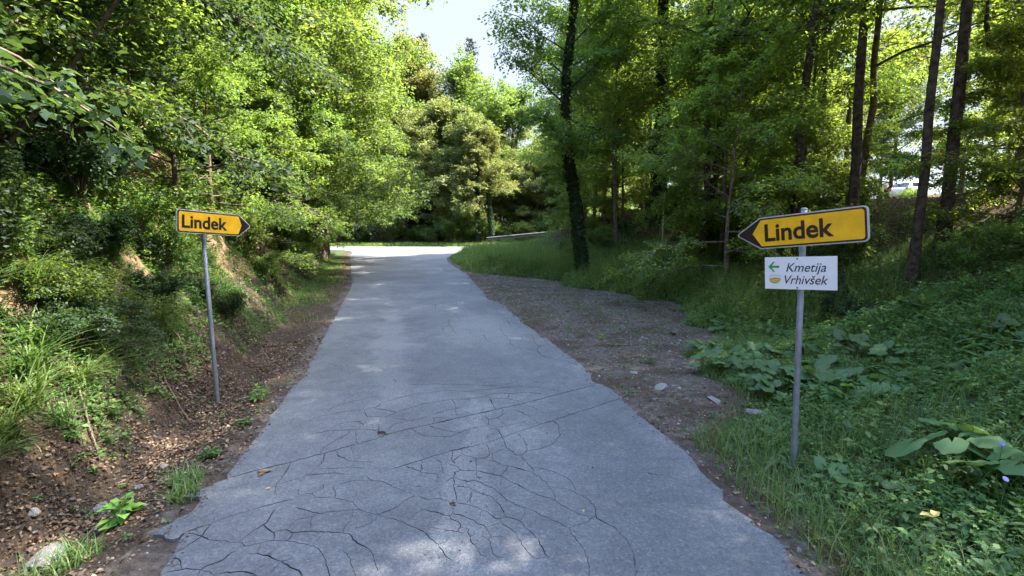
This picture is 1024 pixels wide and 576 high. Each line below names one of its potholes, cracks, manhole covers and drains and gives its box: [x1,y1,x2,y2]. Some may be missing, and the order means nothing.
crack [162,436,637,576]
crack [289,383,568,455]
